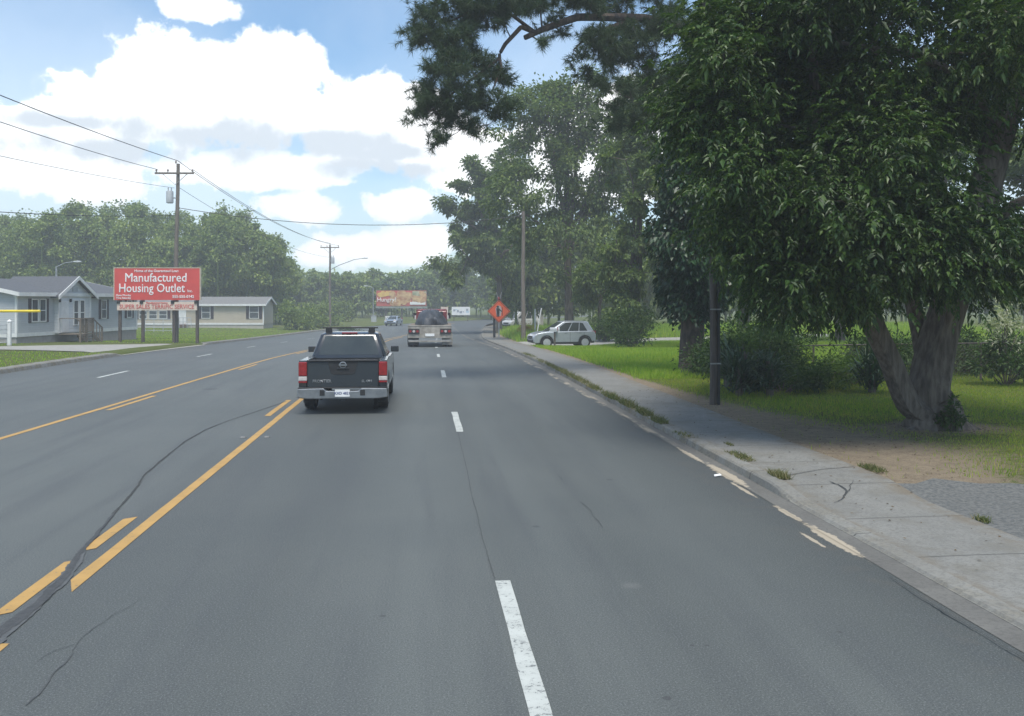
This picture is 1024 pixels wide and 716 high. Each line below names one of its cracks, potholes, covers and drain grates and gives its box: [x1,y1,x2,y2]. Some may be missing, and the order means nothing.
crack [25,599,139,705]
crack [789,466,854,502]
